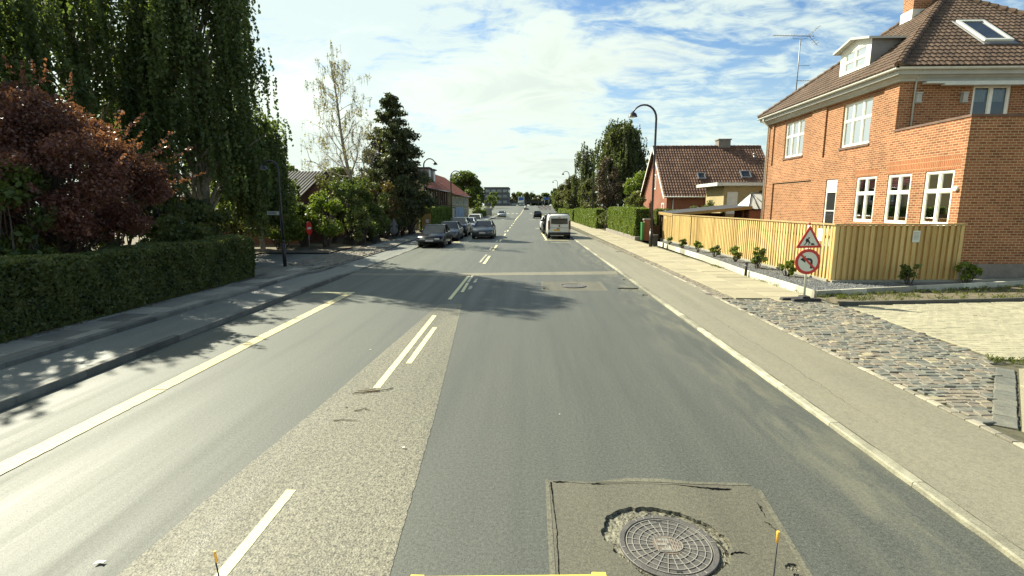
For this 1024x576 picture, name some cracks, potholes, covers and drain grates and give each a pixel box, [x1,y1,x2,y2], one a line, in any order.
manhole cover [619,516,720,576]
crack [713,538,749,555]
